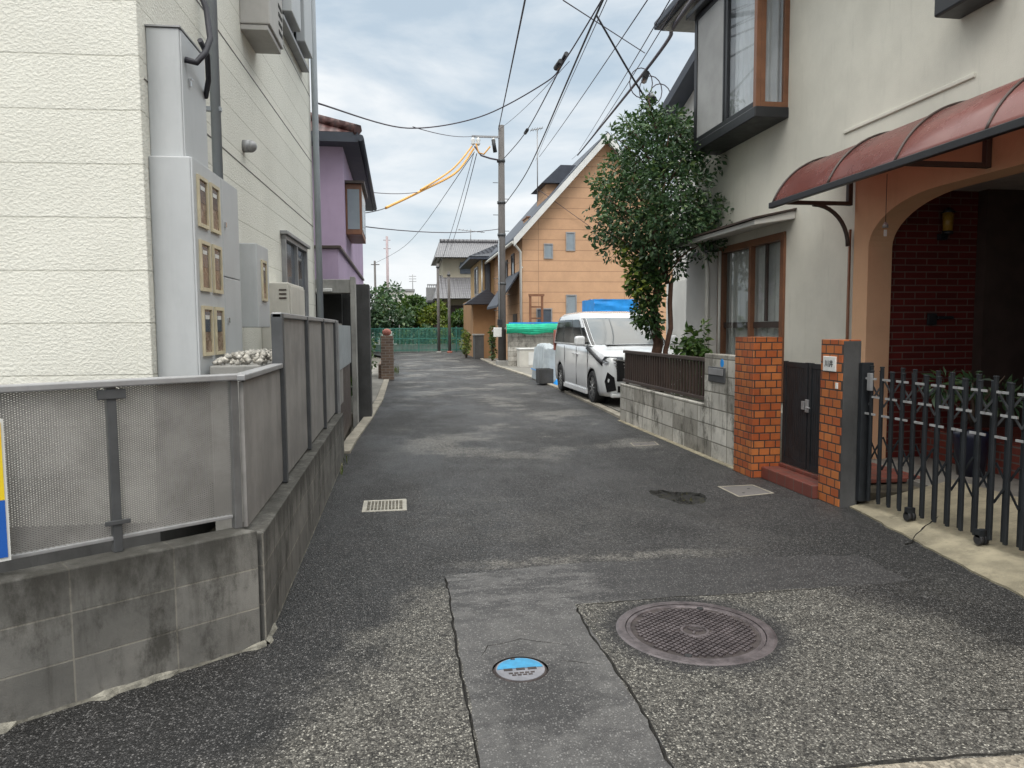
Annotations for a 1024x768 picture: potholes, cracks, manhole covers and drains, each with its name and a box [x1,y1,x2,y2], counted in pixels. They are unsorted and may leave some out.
manhole cover [616,601,778,666]
pothole [649,490,707,505]
utility cover [717,485,773,497]
drain grate [362,499,407,512]
utility cover [493,658,548,683]
